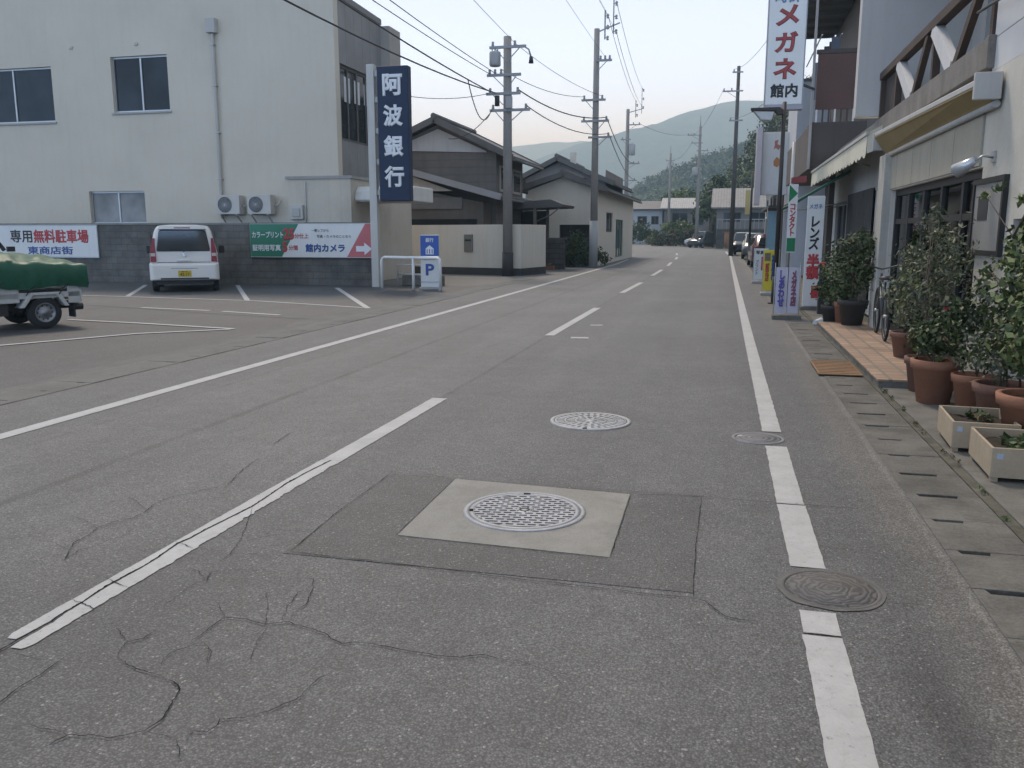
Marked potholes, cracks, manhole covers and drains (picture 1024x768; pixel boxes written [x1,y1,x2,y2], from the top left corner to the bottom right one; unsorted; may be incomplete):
manhole cover [398,479,630,557]
crack [0,460,570,702]
crack [32,622,329,760]
manhole cover [550,412,631,431]
manhole cover [732,432,785,445]
crack [22,423,332,565]
manhole cover [776,568,887,611]
